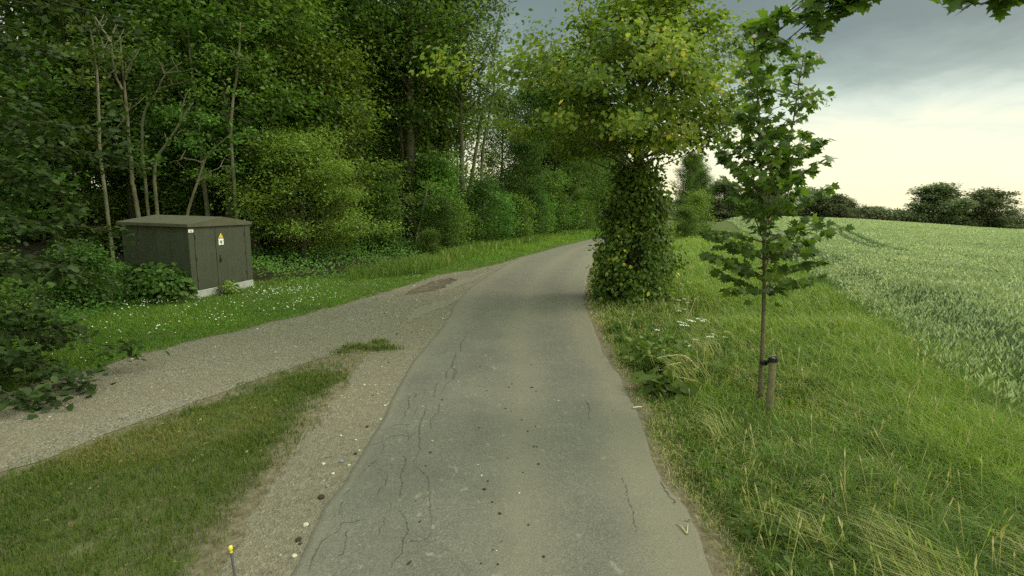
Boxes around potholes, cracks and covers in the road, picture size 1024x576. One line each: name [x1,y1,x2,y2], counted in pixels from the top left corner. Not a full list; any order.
crack [365,336,466,568]
crack [309,487,360,570]
